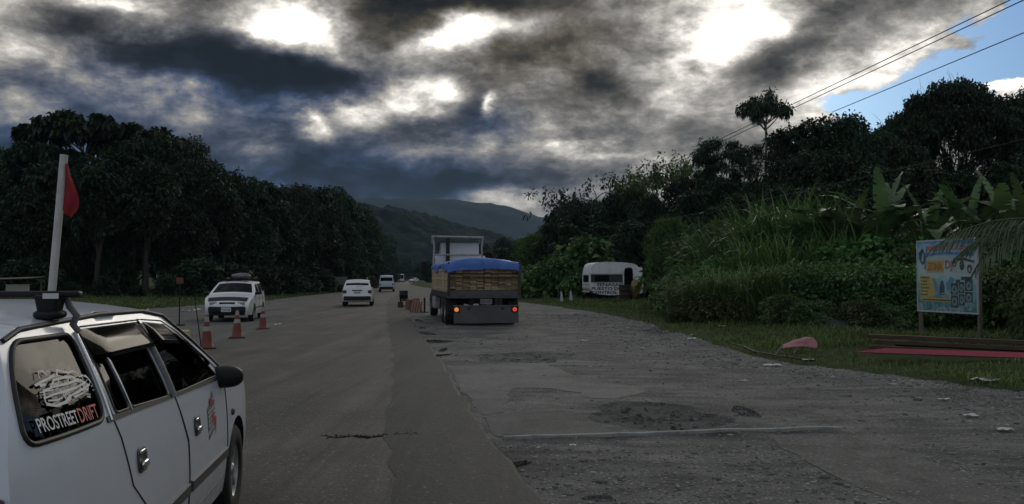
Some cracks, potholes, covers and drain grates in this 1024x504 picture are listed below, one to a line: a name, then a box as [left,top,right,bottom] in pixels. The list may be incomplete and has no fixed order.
pothole [588,401,737,431]
pothole [731,405,761,418]
pothole [474,352,577,364]
crack [321,430,418,439]
